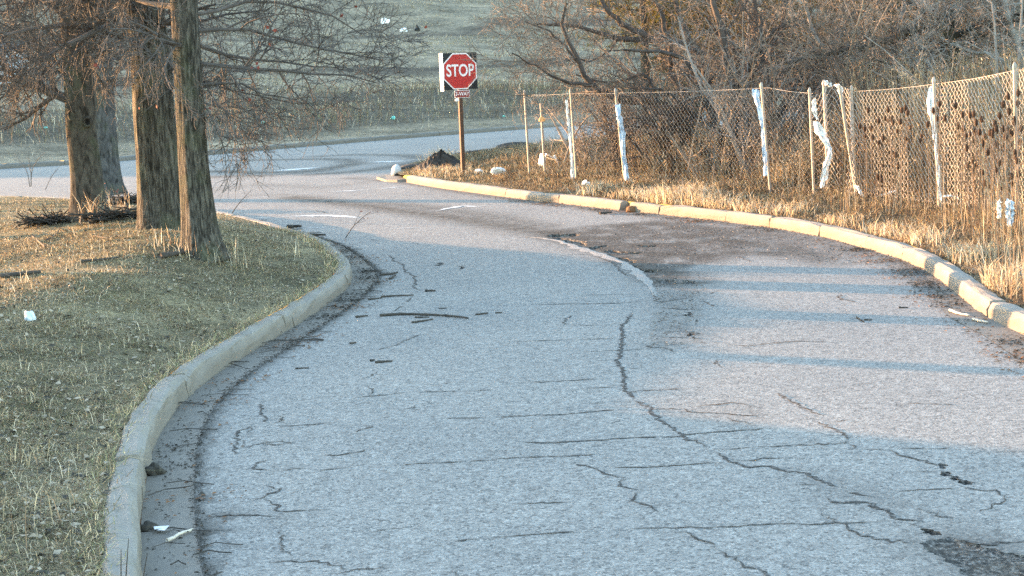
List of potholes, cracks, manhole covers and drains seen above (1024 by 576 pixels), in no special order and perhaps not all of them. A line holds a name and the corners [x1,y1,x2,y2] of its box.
crack [206,401,396,575]
crack [410,286,1007,576]
